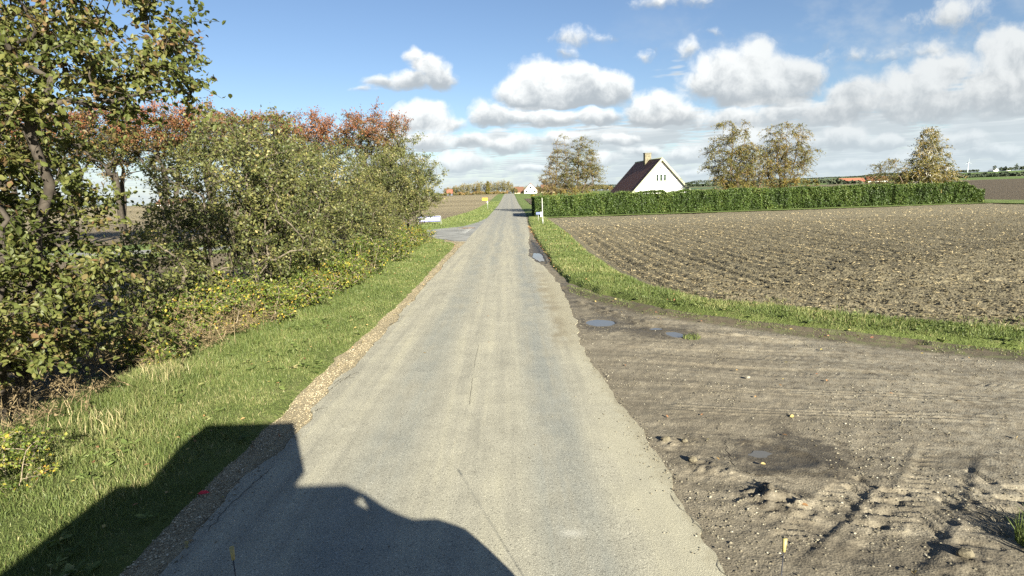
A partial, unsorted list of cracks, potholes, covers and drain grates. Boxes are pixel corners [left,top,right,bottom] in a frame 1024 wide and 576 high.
crack [208,467,272,531]
